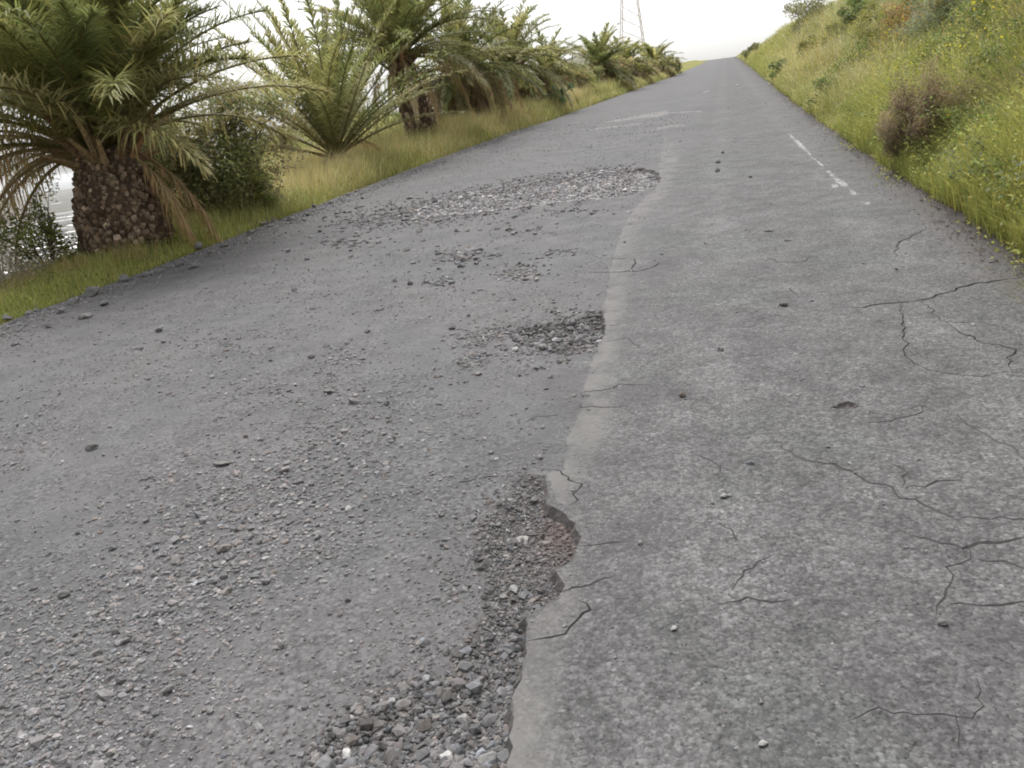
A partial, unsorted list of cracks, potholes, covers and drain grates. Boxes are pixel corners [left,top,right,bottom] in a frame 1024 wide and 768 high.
crack [863,405,1024,458]
crack [587,258,658,273]
pothole [437,298,606,380]
crack [548,469,583,506]
pothole [220,442,581,768]
pothole [331,162,661,237]
crack [845,276,1024,377]
crack [845,678,985,750]
crack [526,384,652,422]
crack [776,440,1024,616]
crack [720,524,796,605]
crack [893,225,927,257]
